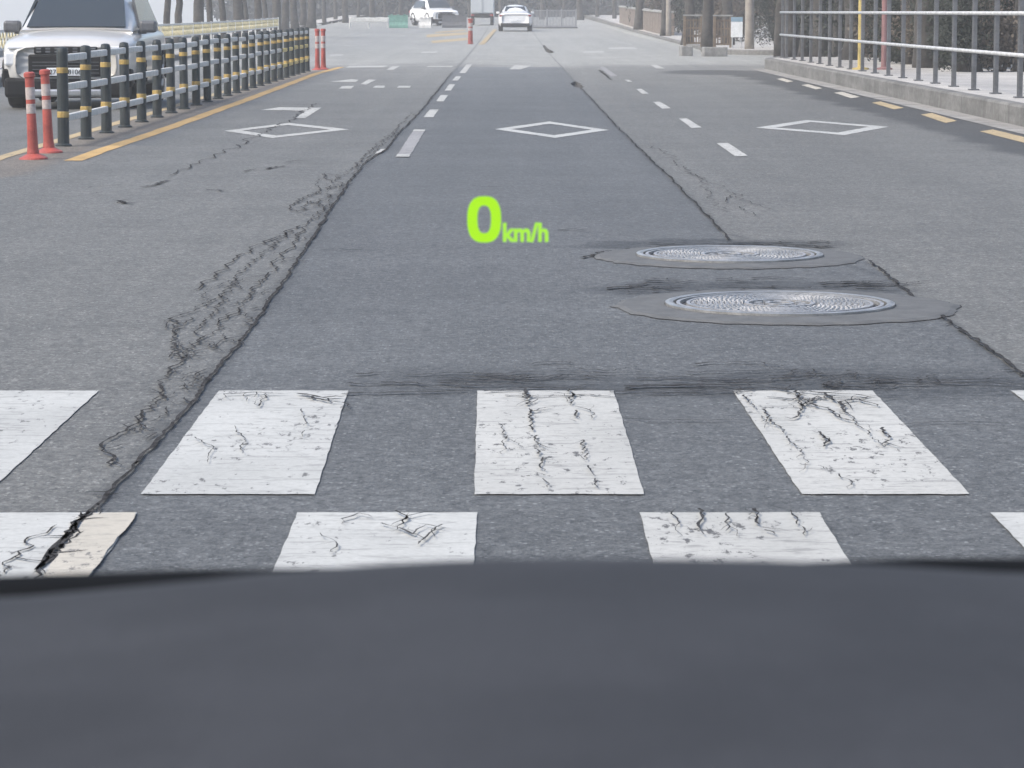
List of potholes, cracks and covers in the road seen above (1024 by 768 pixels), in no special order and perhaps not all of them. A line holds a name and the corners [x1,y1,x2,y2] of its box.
crack [2,72,1024,575]
manhole cover [593,245,864,269]
manhole cover [610,289,962,326]
